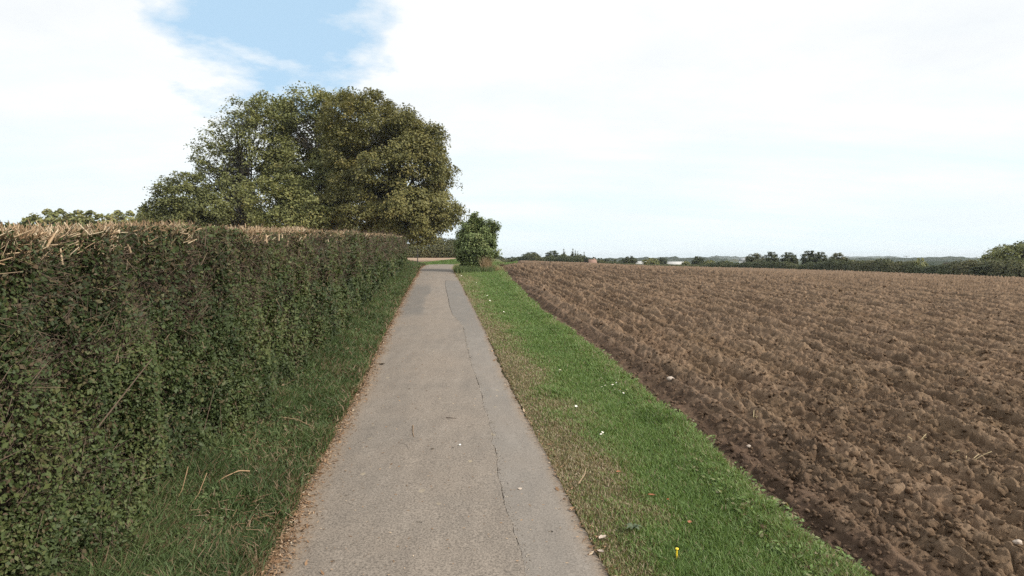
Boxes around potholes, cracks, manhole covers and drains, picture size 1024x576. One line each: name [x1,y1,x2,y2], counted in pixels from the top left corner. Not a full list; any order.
crack [445,280,526,575]
